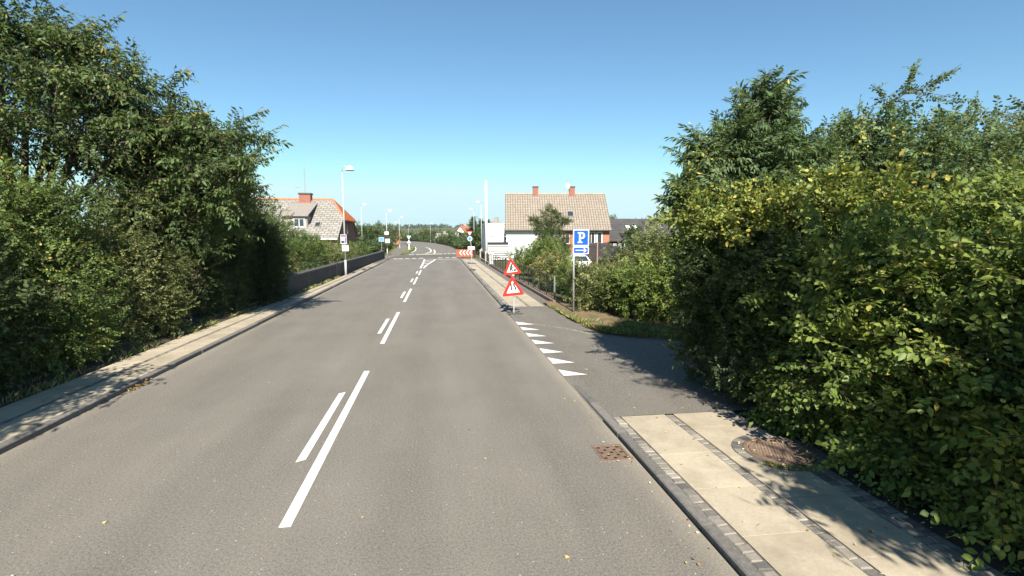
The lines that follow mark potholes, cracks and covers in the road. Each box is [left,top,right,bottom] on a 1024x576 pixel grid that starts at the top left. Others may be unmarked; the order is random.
drain grate [591,444,633,461]
manhole cover [731,434,830,472]
